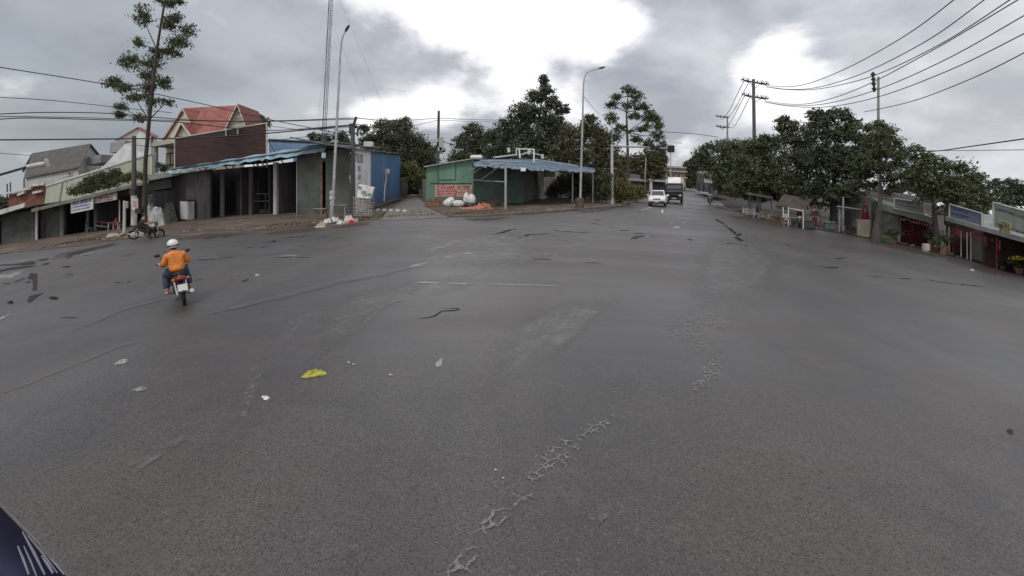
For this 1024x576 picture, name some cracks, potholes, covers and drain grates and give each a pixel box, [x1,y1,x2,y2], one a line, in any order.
crack [669,313,737,393]
crack [447,415,614,576]
